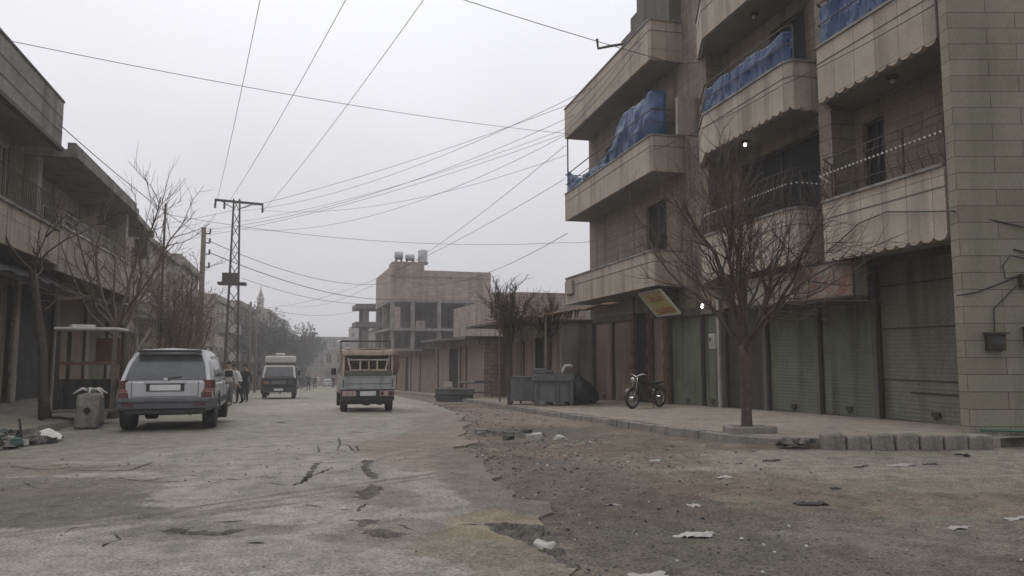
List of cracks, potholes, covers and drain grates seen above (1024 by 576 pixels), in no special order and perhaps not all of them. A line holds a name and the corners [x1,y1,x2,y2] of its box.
pothole [359,460,378,480]
pothole [351,484,385,500]
crack [11,432,415,531]
pothole [361,528,412,539]
pothole [348,519,381,527]
pothole [484,522,581,570]
